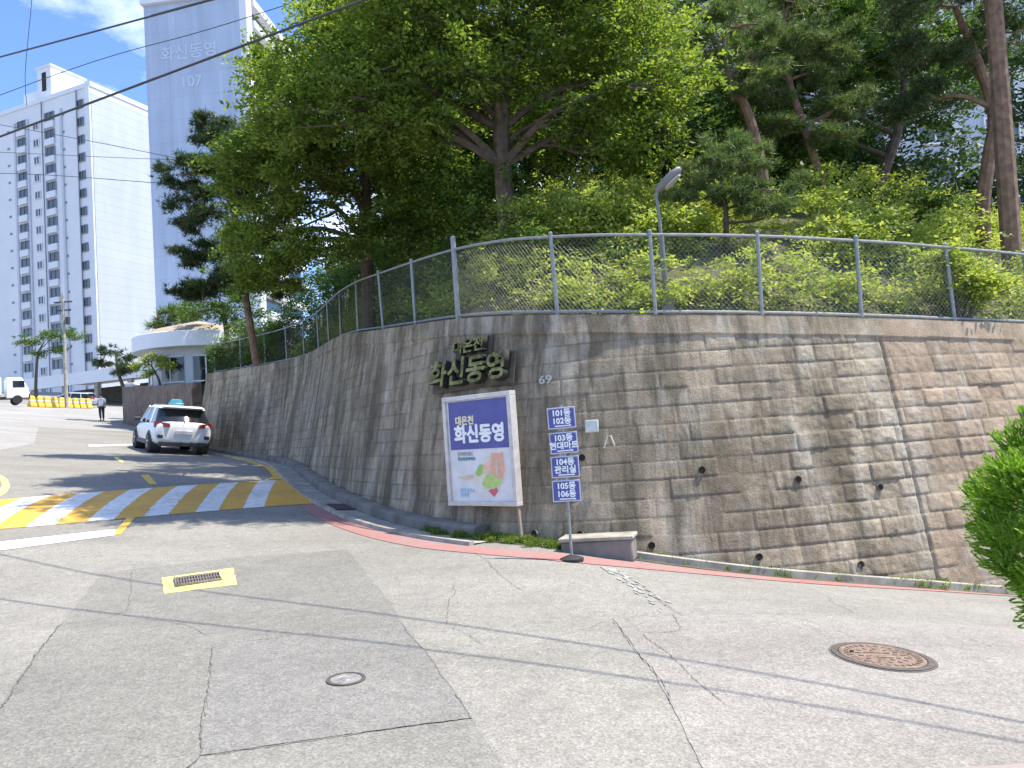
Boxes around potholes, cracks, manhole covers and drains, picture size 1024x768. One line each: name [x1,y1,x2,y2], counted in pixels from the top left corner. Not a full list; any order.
crack [70,570,471,768]
utility cover [326,672,366,686]
manhole cover [828,642,939,672]
drain grate [162,568,237,593]
